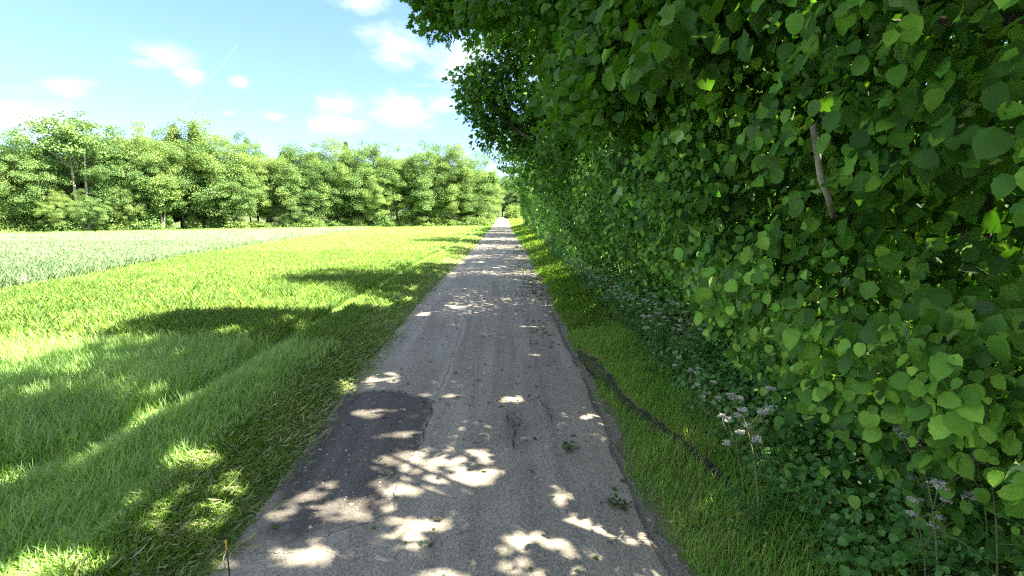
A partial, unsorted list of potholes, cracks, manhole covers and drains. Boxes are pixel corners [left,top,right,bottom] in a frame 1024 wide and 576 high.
crack [507,397,551,449]
